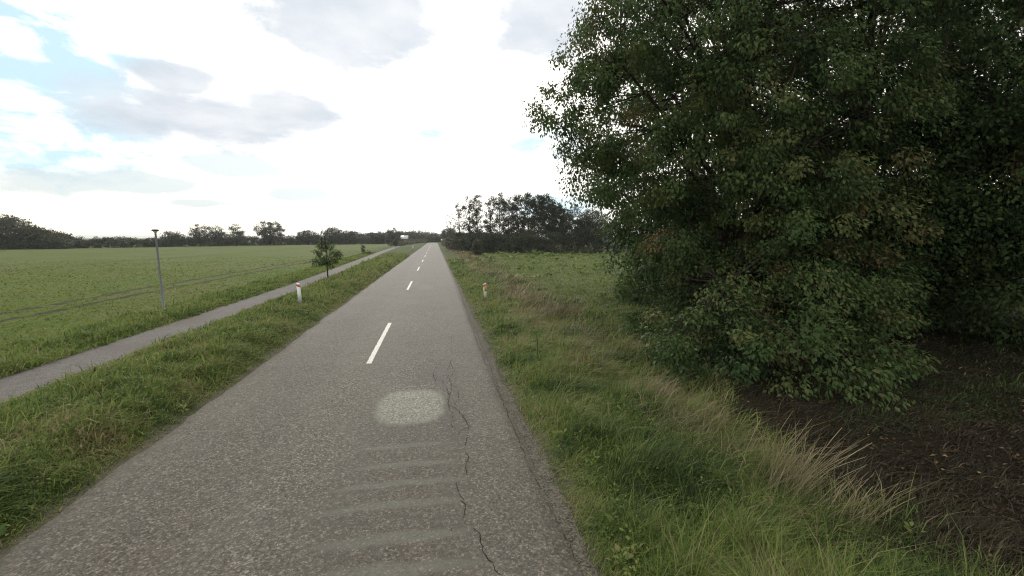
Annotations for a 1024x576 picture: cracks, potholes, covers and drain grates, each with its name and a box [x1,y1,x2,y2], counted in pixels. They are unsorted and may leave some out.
crack [433,361,500,574]
crack [462,301,581,567]
